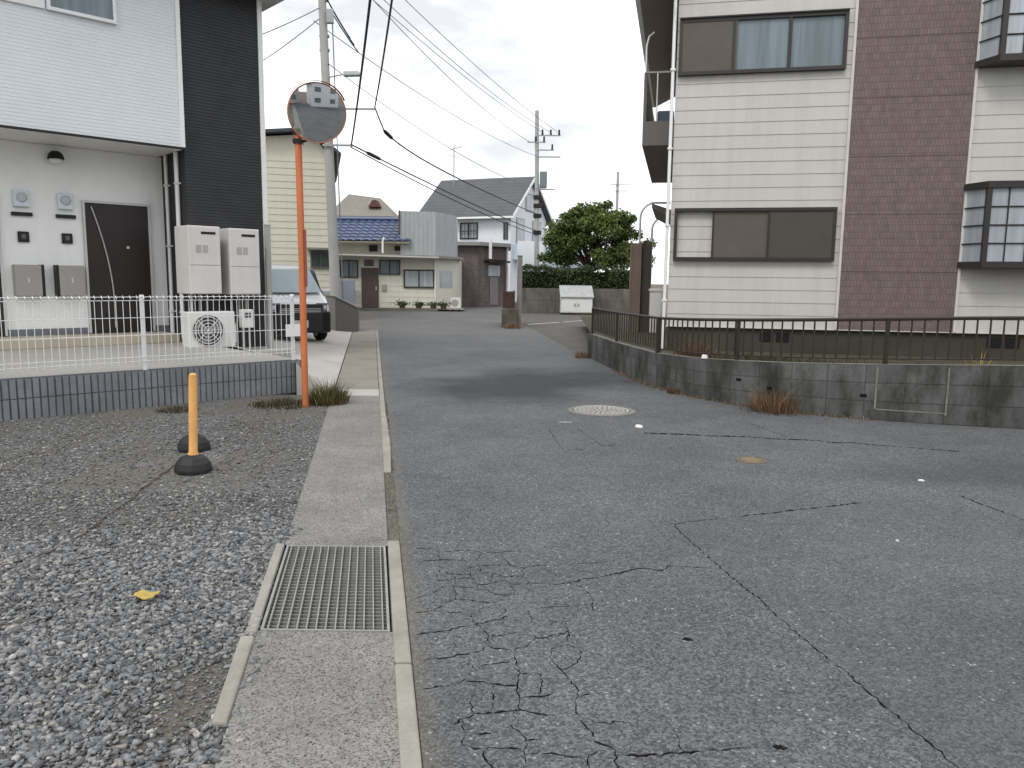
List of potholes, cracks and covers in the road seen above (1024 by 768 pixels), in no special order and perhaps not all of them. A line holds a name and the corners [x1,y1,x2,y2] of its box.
crack [645,421,960,452]
crack [555,525,959,768]
manhole cover [568,405,636,417]
crack [412,548,754,768]
drain grate [260,545,390,632]
